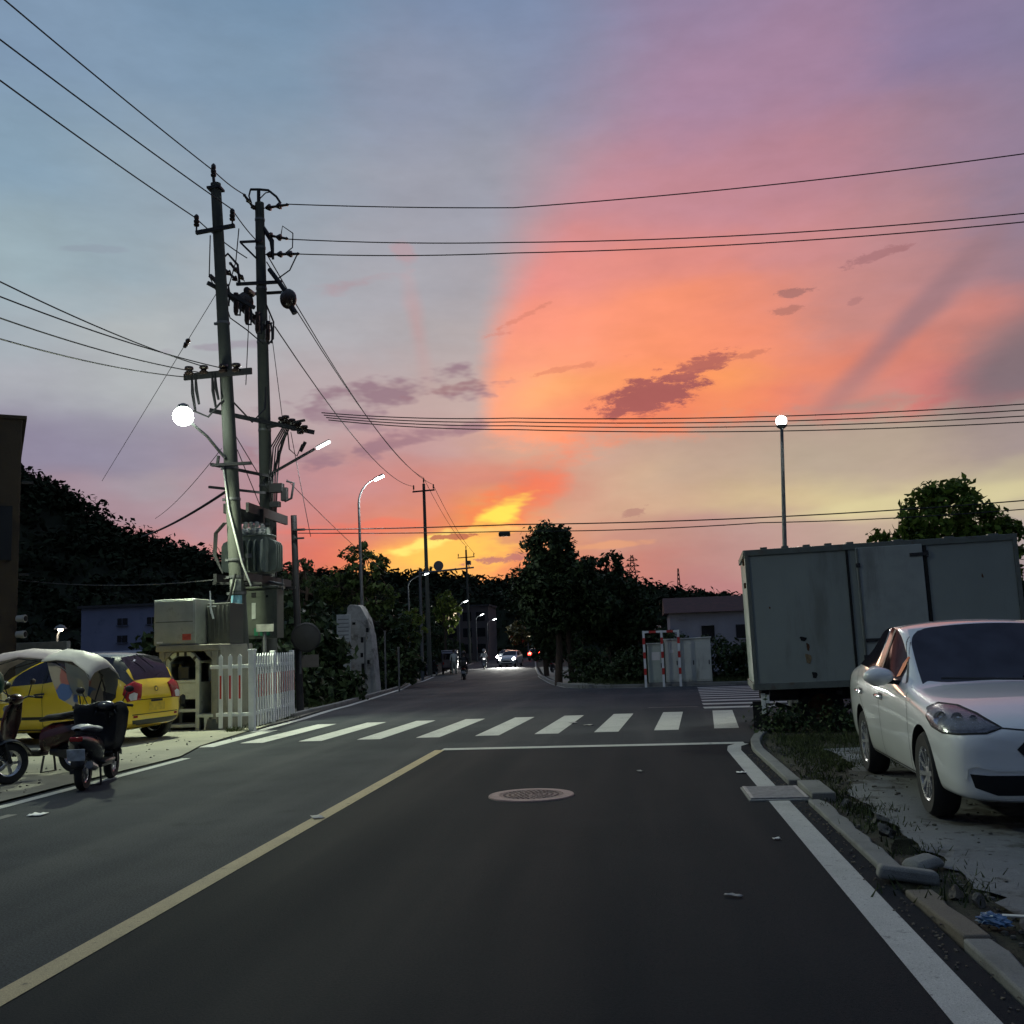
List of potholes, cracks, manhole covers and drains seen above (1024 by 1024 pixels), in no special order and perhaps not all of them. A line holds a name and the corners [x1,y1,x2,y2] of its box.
manhole cover [488,788,574,802]
